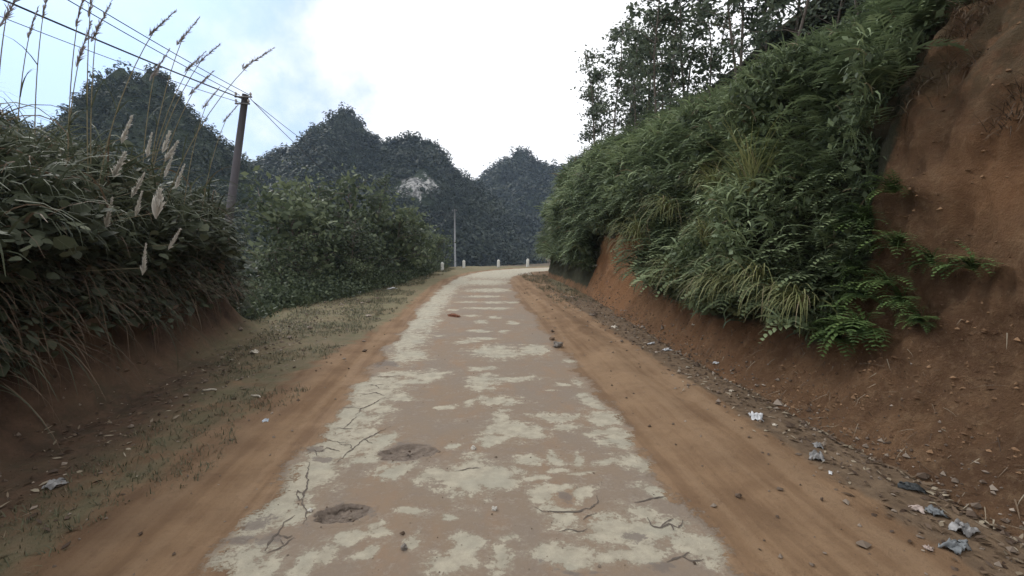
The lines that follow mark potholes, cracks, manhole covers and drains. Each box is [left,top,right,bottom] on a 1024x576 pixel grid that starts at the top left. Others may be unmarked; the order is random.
pothole [370,441,446,465]
crack [638,496,683,530]
pothole [304,499,380,529]
crack [537,496,599,532]
crack [265,375,399,553]
